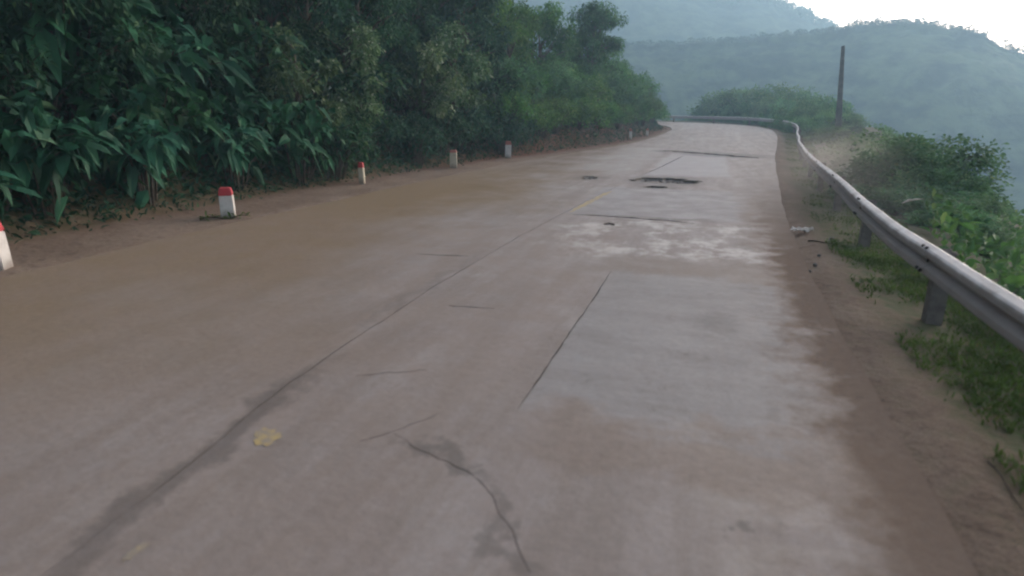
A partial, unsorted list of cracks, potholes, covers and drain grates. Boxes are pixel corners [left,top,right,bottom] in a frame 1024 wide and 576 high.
crack [41,189,611,576]
